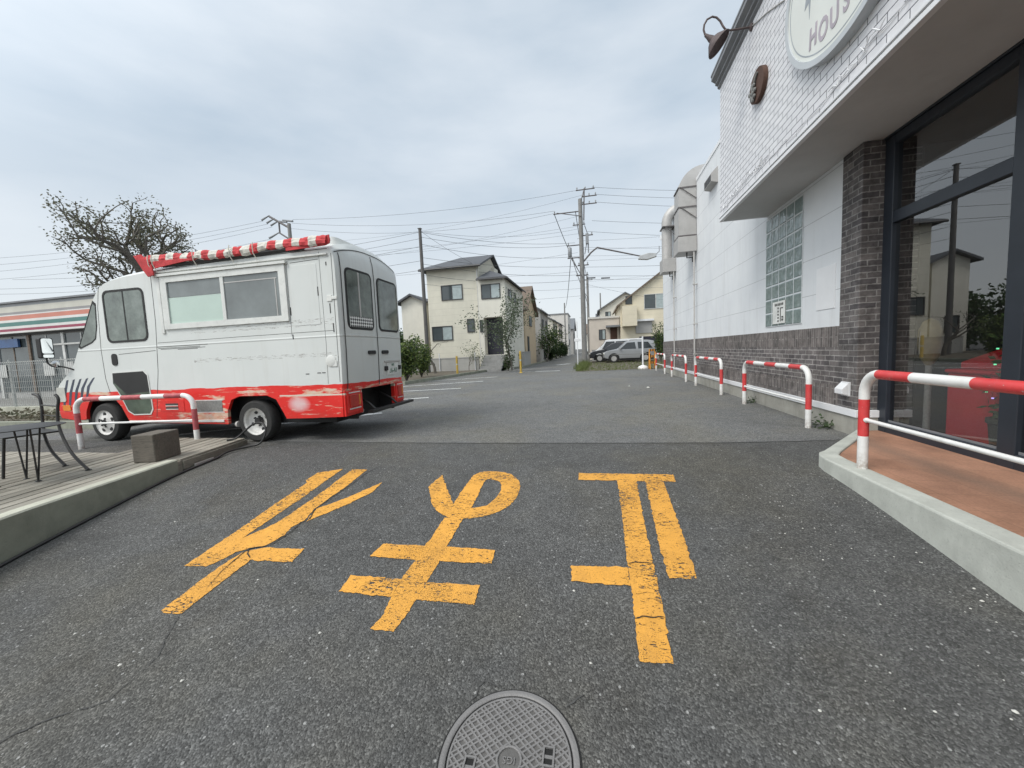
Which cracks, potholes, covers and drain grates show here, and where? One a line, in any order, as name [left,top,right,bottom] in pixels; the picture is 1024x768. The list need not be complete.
manhole cover [436,690,582,768]
crack [0,613,181,743]
